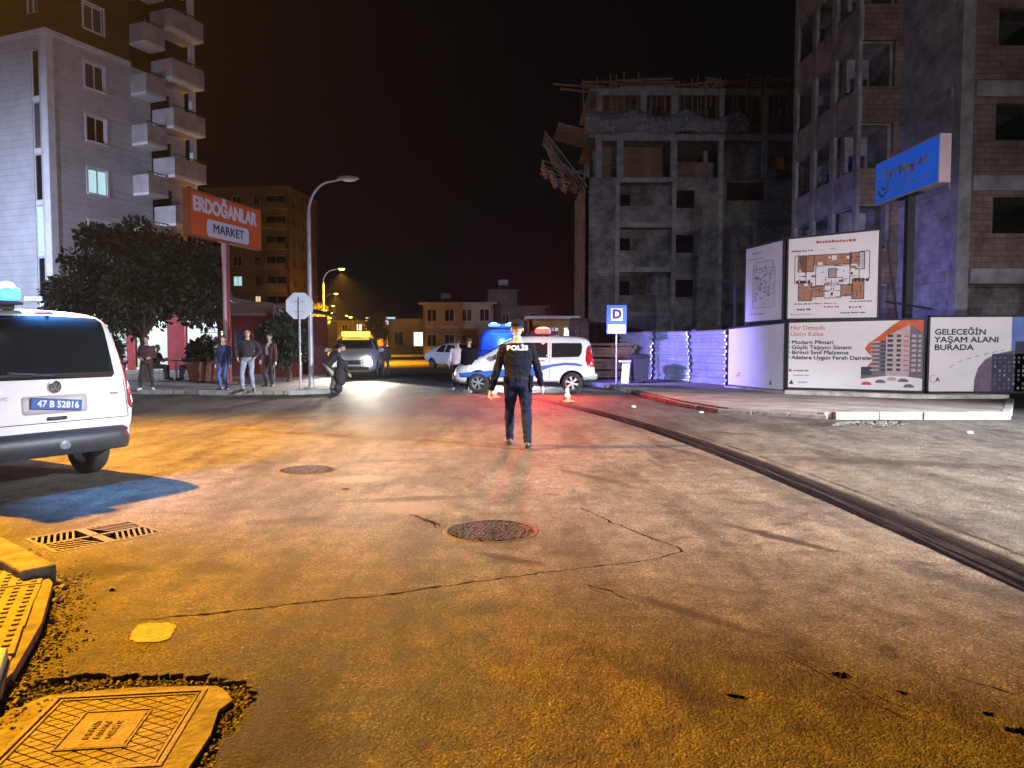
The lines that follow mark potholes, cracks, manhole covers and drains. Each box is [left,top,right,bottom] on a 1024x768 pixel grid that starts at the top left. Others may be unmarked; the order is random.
crack [580,583,631,601]
crack [769,651,915,724]
drain grate [24,520,164,553]
pothole [1004,727,1024,736]
crack [410,514,440,528]
manhole cover [443,519,539,544]
manhole cover [0,686,232,768]
manhole cover [277,465,337,475]
